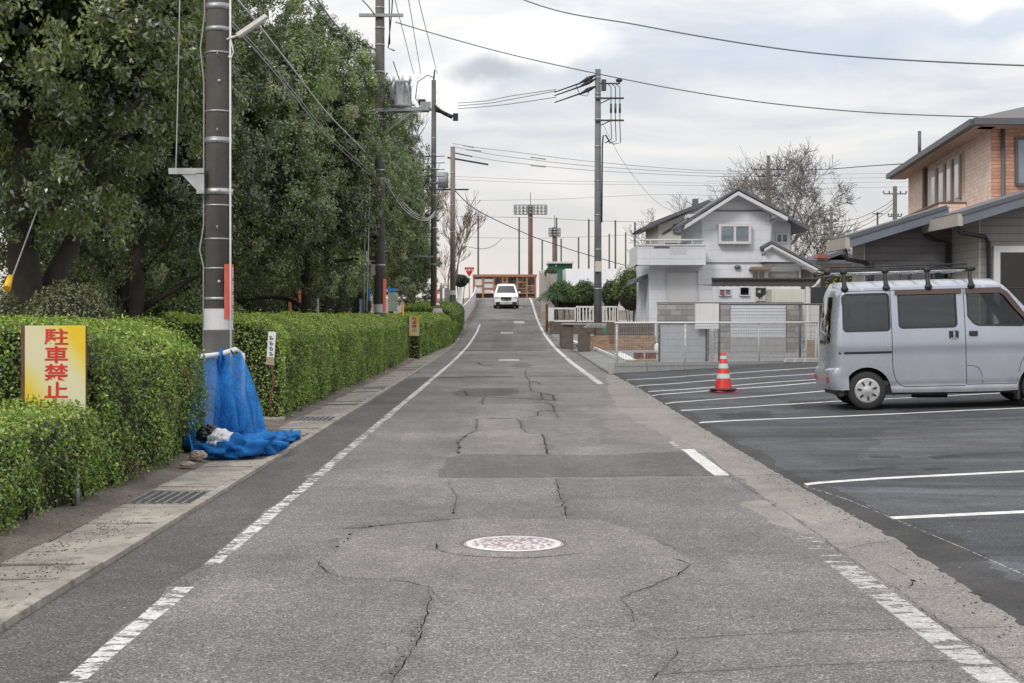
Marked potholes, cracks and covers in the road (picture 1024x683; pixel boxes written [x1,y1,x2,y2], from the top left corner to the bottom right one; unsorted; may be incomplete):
crack [318,563,434,683]
manhole cover [460,535,567,552]
crack [621,539,1012,682]
crack [456,371,558,454]
drain grate [124,490,212,504]
